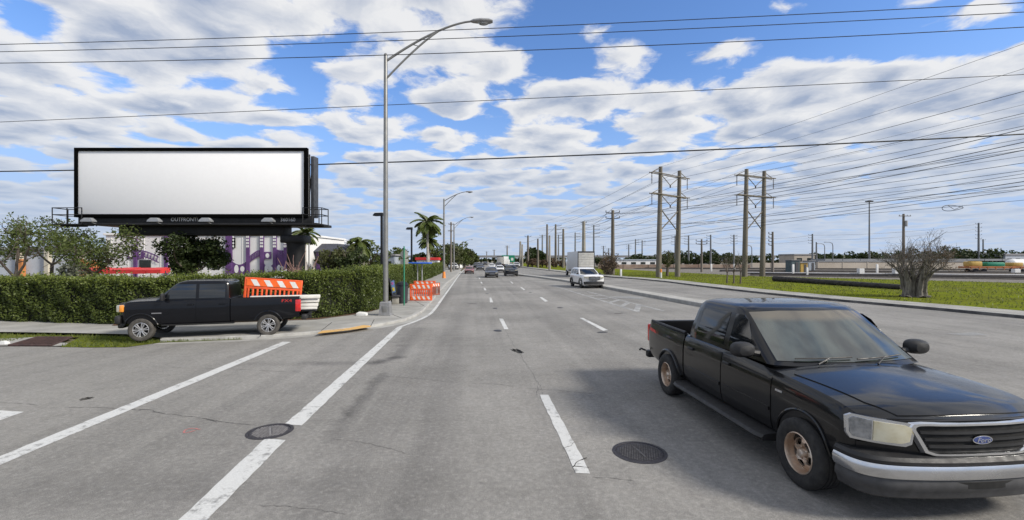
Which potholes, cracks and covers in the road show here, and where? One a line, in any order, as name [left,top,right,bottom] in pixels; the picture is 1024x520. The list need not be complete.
manhole cover [612,441,668,464]
manhole cover [245,423,294,440]
drain grate [8,336,73,346]
